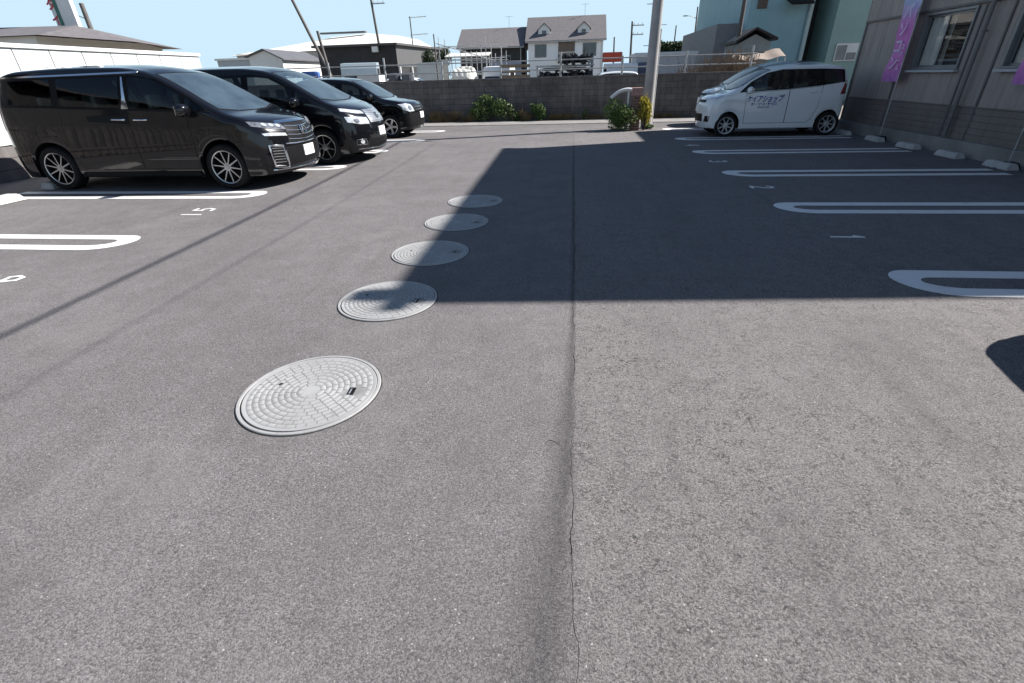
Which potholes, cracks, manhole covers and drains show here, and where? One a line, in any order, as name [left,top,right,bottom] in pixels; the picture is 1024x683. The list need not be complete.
crack [545,155,579,682]
manhole cover [390,241,470,266]
manhole cover [337,281,438,322]
manhole cover [234,356,382,437]
manhole cover [447,195,503,208]
manhole cover [424,214,489,231]
